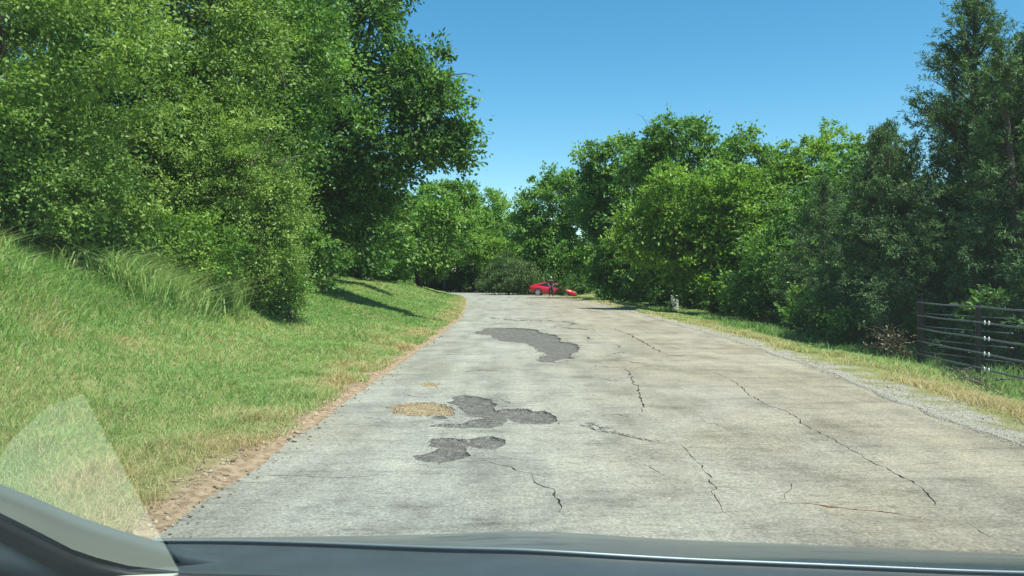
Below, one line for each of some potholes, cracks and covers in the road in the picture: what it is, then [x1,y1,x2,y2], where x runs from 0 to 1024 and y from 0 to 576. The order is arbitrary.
crack [719,374,944,534]
crack [617,443,728,515]
crack [583,330,678,440]
crack [490,455,592,511]
